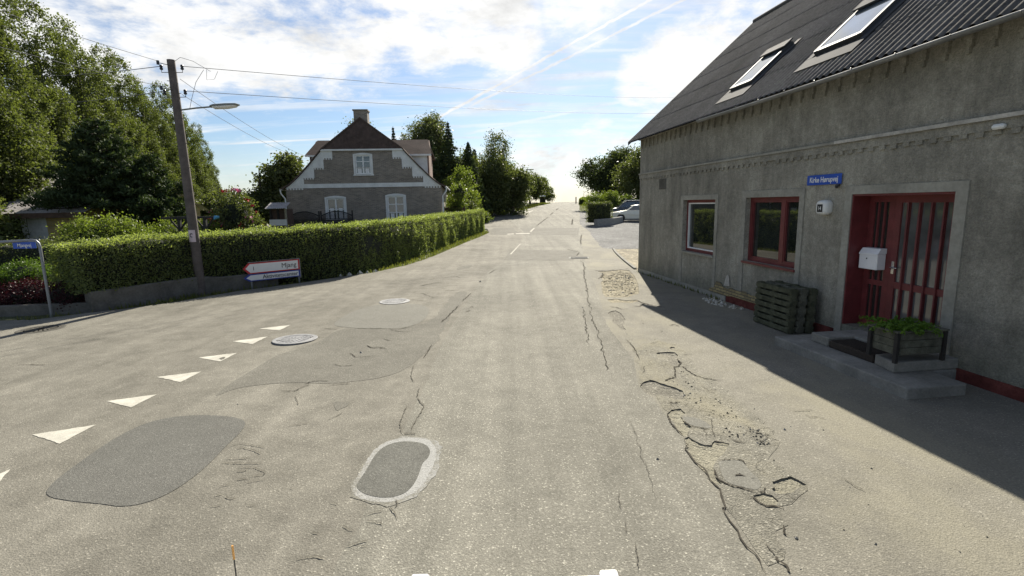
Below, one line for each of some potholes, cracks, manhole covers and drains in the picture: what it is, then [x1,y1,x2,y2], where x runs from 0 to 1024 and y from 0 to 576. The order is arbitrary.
pothole [754,494,778,505]
pothole [685,437,729,485]
pothole [658,352,680,366]
crack [667,402,790,572]
pothole [772,476,806,494]
pothole [640,380,684,400]
crack [399,389,424,434]
crack [214,442,266,506]
pothole [667,409,691,437]
manhole cover [272,334,318,346]
